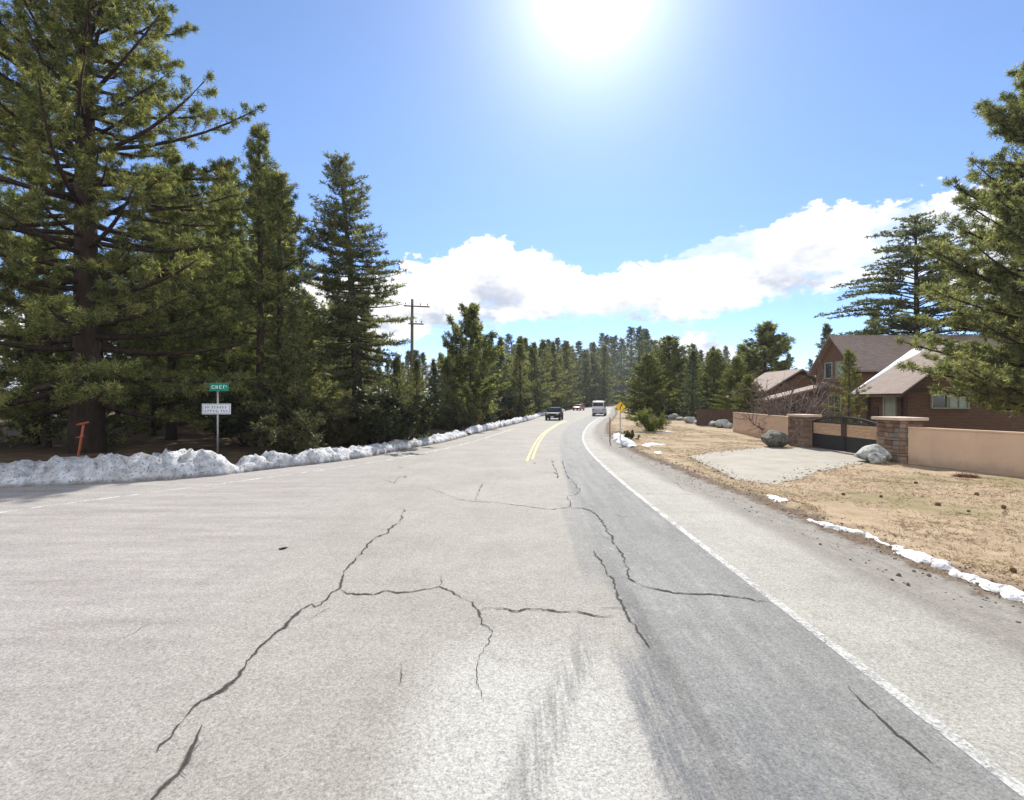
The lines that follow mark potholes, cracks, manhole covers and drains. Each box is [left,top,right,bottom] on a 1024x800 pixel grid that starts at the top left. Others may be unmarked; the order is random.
crack [150,510,603,800]
crack [429,461,768,647]
crack [848,686,940,768]
